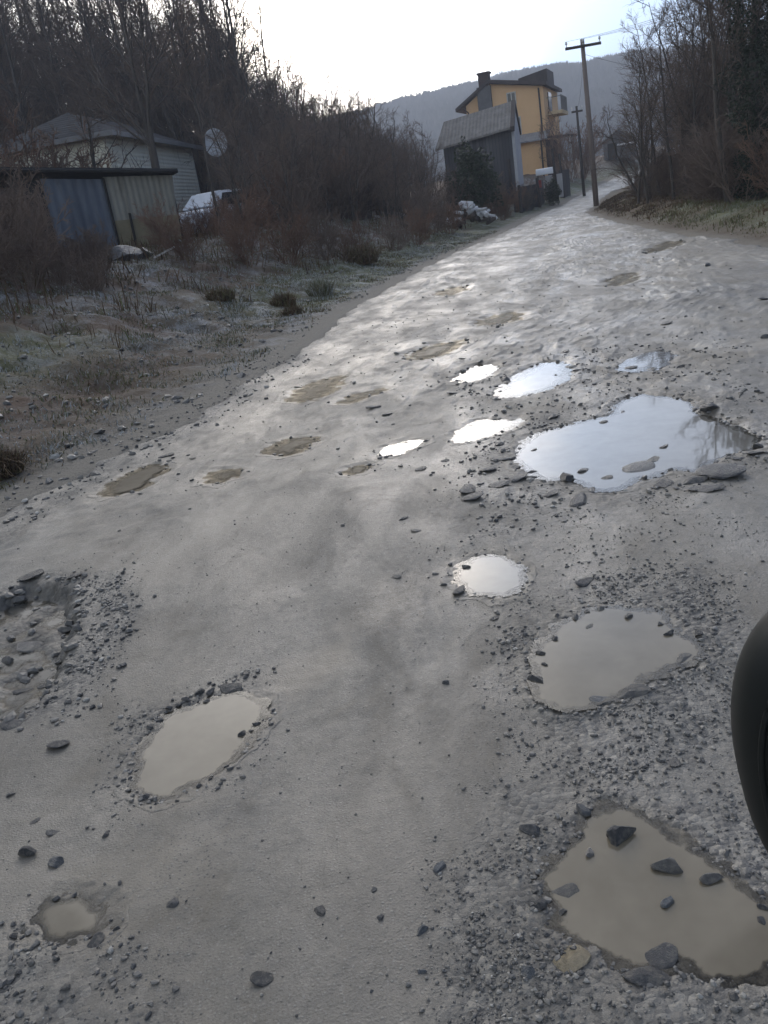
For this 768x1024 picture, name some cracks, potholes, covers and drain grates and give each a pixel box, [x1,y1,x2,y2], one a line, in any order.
pothole [2,875,133,955]
pothole [112,686,281,813]
pothole [272,373,359,405]
pothole [389,336,479,362]
pothole [362,434,436,460]
pothole [605,349,688,375]
pothole [190,464,256,489]
pothole [481,358,584,401]
pothole [635,238,696,255]
pothole [0,571,93,731]
pothole [443,413,532,446]
pothole [443,359,513,386]
